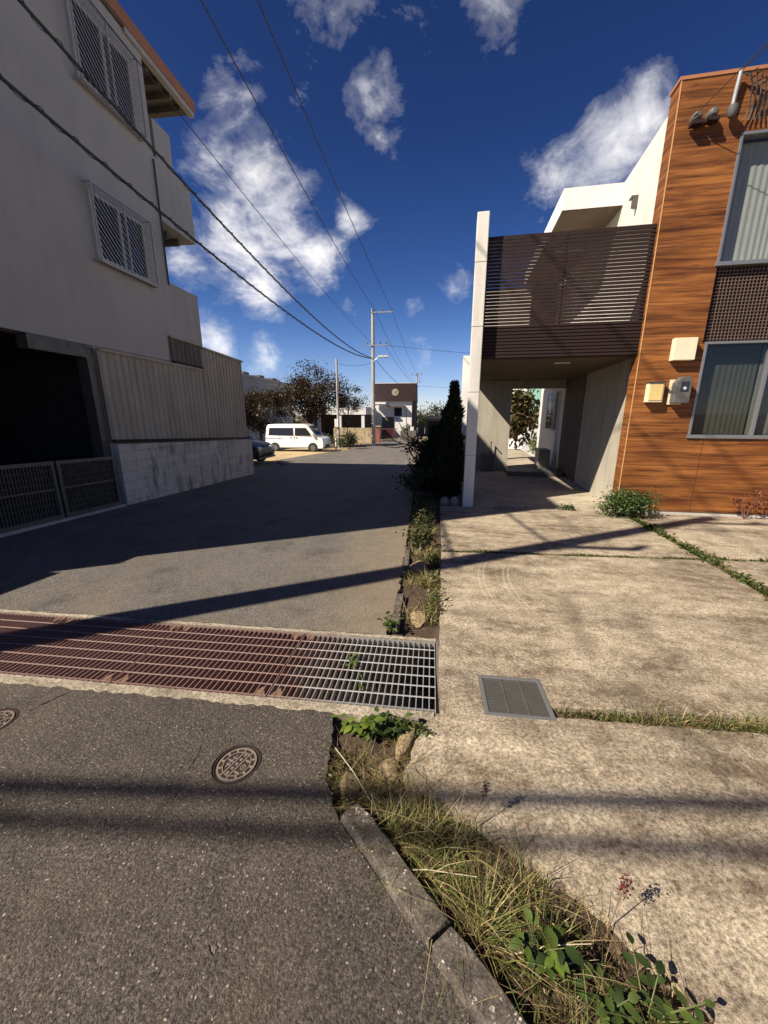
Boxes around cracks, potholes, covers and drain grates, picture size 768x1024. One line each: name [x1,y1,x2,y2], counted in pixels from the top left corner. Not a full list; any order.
drain grate [111,625,305,697]
manhole cover [212,744,261,784]
manhole cover [0,708,20,730]
drain grate [0,612,67,652]
drain grate [267,634,436,713]
drain grate [478,675,557,721]
